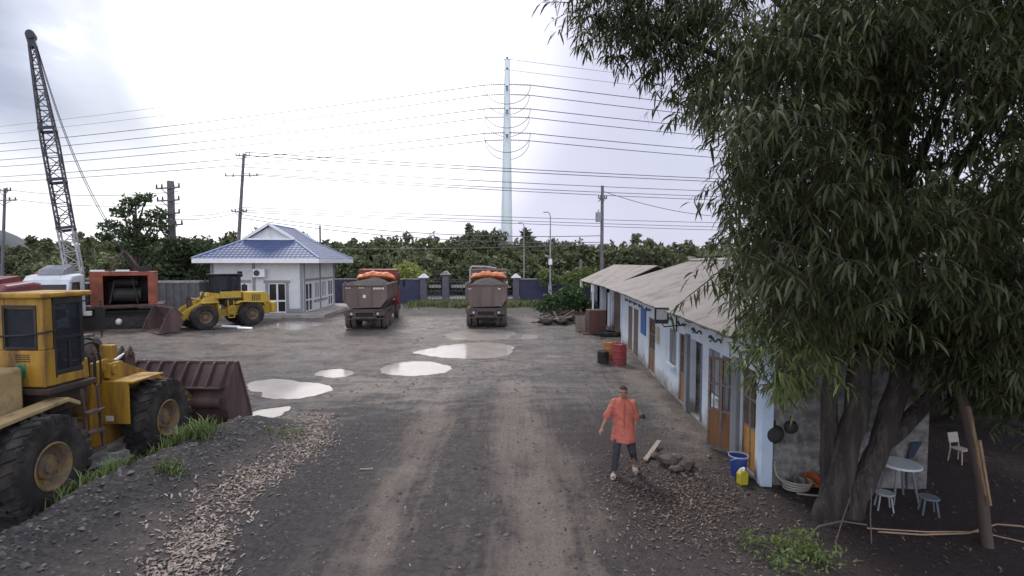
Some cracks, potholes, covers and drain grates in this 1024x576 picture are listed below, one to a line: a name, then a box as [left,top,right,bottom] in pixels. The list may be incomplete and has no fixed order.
pothole [400,340,523,360]
pothole [372,359,461,378]
pothole [436,328,524,342]
pothole [309,367,359,379]
pothole [244,377,342,401]
pothole [252,404,297,418]
